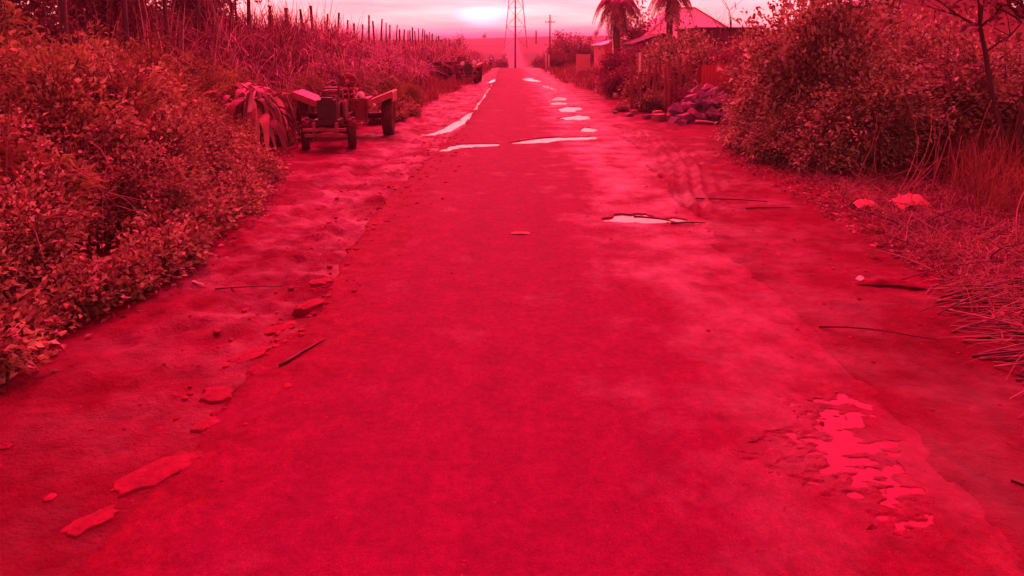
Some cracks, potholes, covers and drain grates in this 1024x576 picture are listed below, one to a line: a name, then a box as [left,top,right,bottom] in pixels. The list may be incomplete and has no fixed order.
pothole [600,213,688,223]
pothole [509,136,598,144]
pothole [439,143,501,151]
